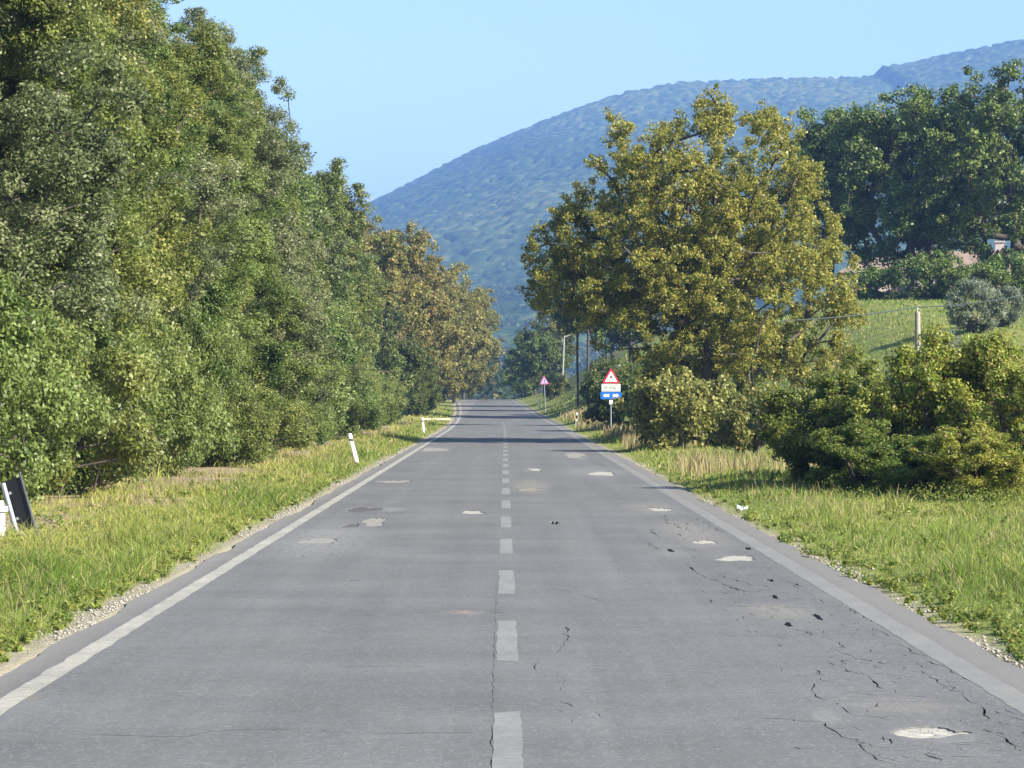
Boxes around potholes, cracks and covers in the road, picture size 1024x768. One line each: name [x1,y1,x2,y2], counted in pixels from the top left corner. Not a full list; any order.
crack [390,585,497,768]
crack [119,729,468,737]
crack [647,502,1024,763]
